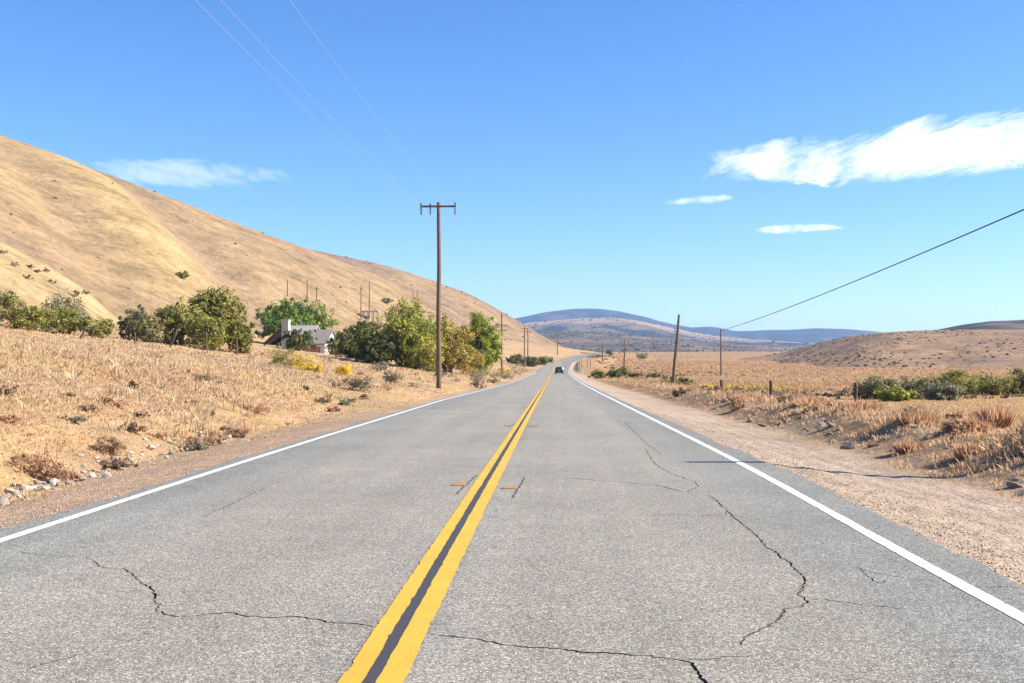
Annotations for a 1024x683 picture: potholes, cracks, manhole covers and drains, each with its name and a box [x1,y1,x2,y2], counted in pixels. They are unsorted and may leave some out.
crack [575,424,897,645]
crack [18,551,732,683]
